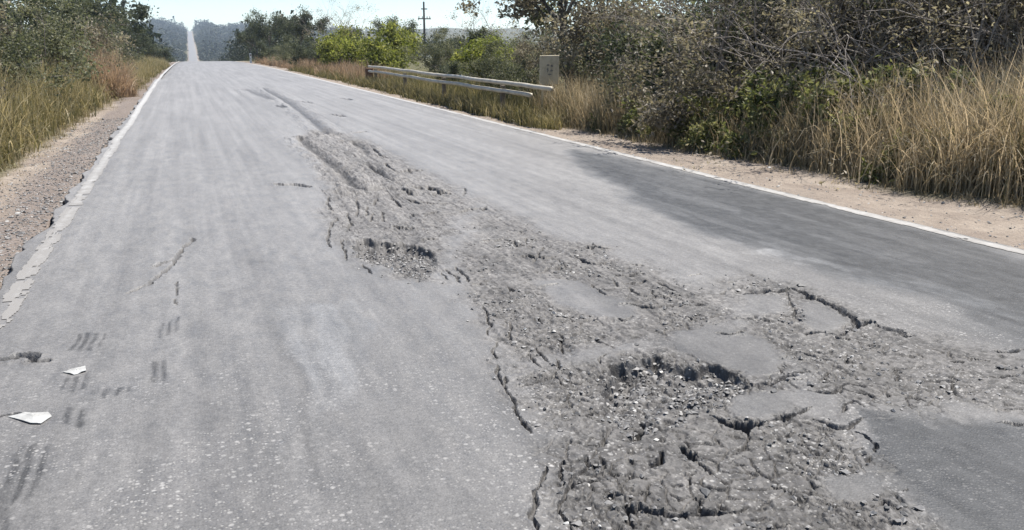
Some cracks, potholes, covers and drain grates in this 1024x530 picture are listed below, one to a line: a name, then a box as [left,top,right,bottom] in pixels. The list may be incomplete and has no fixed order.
pothole [599,353,748,439]
crack [240,87,1024,530]
crack [127,237,197,305]
pothole [352,238,440,281]
